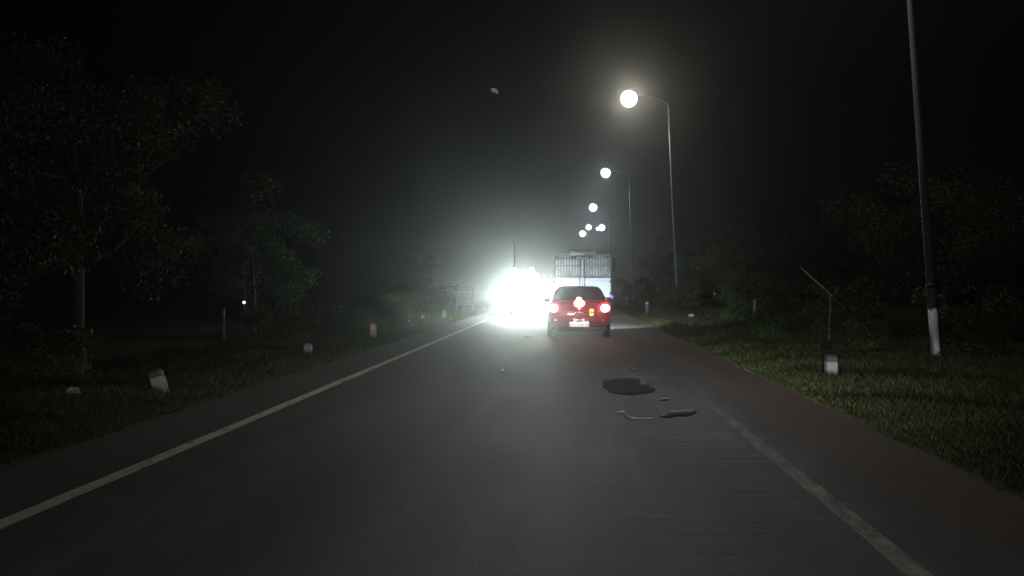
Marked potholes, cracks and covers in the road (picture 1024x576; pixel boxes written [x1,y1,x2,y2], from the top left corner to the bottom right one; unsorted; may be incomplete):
pothole [658,410,697,418]
pothole [602,376,656,395]
crack [616,410,654,420]
